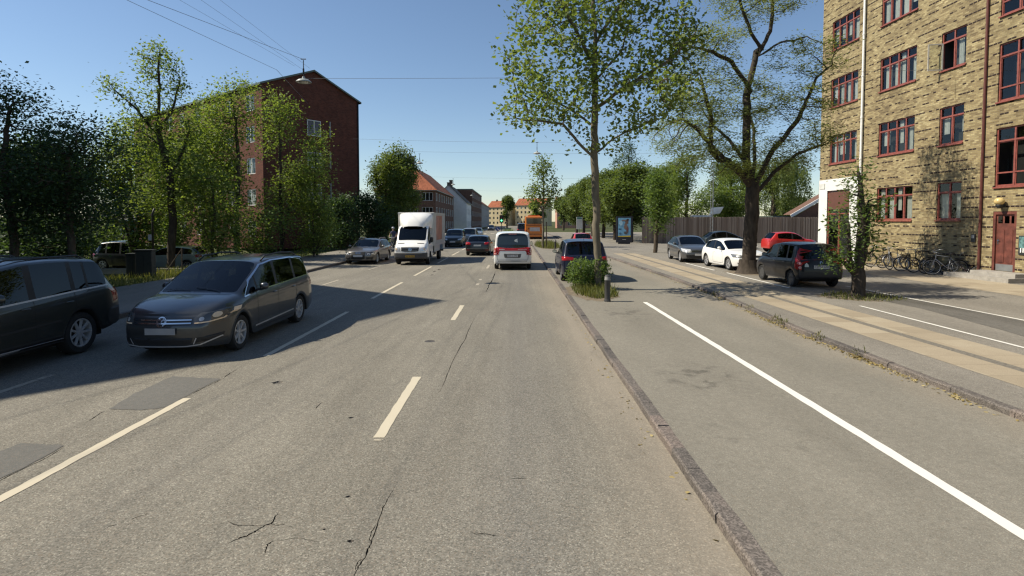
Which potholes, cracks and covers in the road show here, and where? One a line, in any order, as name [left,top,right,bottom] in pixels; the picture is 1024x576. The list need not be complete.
crack [354,487,395,576]
crack [228,514,319,553]
